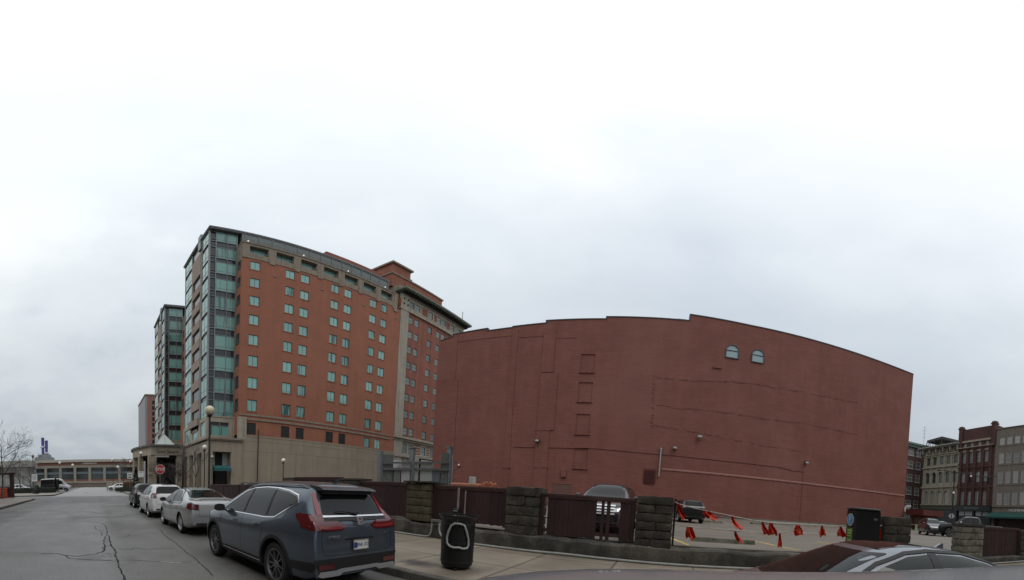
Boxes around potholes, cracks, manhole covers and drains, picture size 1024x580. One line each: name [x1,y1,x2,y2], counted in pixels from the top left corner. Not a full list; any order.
crack [43,506,214,580]
